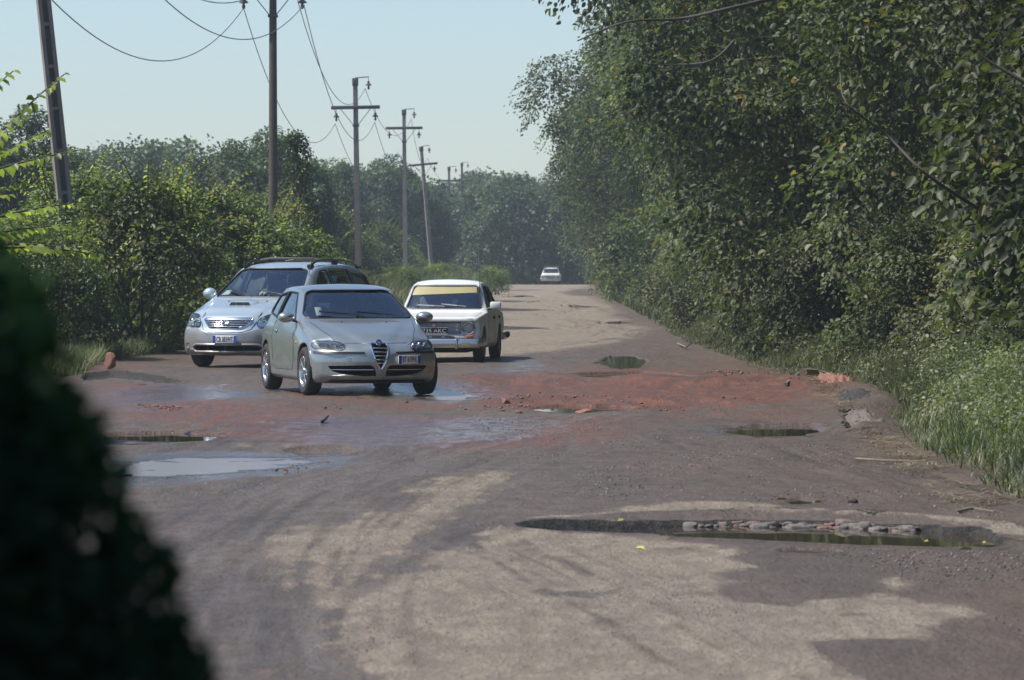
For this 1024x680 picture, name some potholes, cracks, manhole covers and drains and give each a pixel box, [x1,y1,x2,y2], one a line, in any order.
pothole [505,517,1024,549]
pothole [112,455,328,478]
pothole [108,430,229,443]
pothole [590,354,654,369]
pothole [716,421,837,437]
pothole [521,403,647,414]
